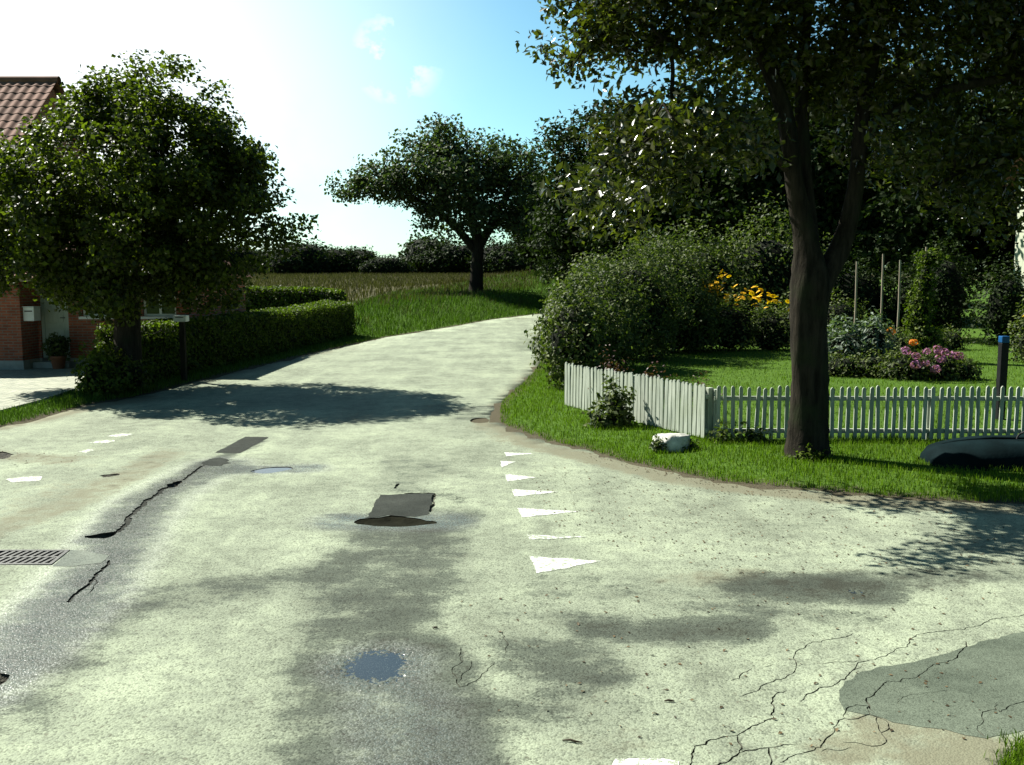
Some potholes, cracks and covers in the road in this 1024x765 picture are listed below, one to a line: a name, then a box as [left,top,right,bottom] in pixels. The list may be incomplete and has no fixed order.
crack [690,614,1024,765]
drain grate [0,550,70,565]
crack [114,465,204,533]
crack [66,560,110,602]
crack [452,632,508,687]
pothole [354,515,437,527]
